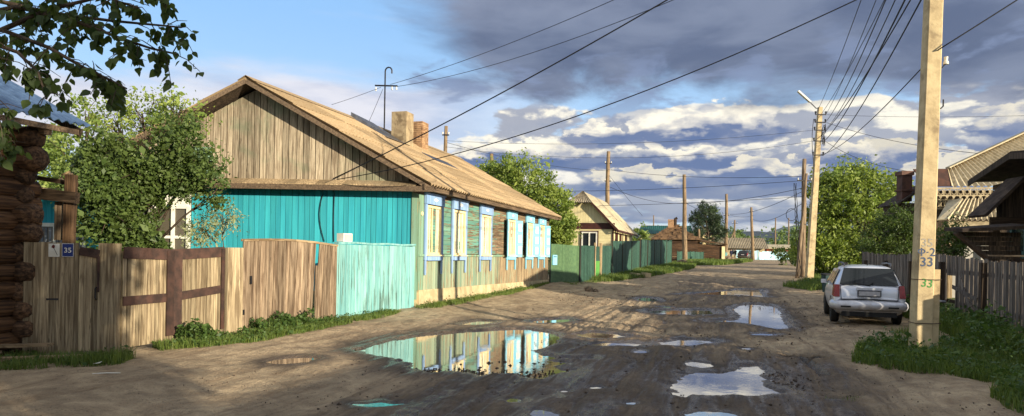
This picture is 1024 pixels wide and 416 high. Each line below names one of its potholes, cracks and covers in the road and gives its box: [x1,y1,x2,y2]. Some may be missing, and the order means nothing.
pothole [263,355,324,364]
pothole [700,302,796,329]
pothole [351,326,600,379]
pothole [657,361,794,397]
pothole [656,336,724,346]
pothole [677,288,770,297]
